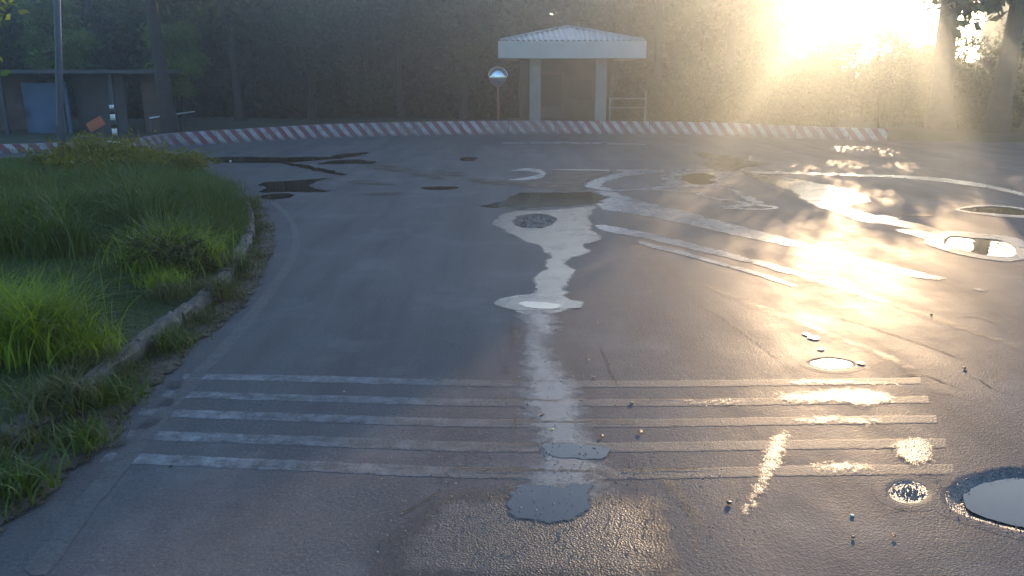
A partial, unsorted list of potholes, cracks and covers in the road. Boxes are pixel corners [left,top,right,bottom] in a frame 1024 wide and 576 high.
crack [837,317,1010,398]
